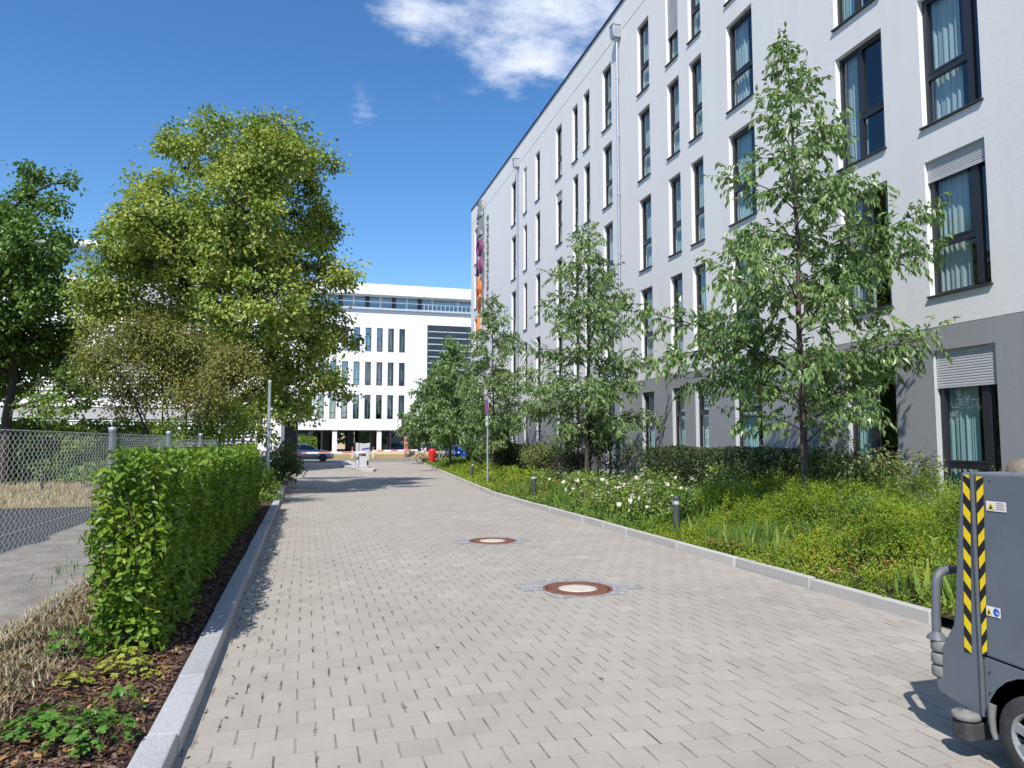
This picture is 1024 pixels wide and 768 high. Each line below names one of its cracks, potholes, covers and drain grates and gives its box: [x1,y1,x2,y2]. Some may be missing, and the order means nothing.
manhole cover [543,581,613,596]
